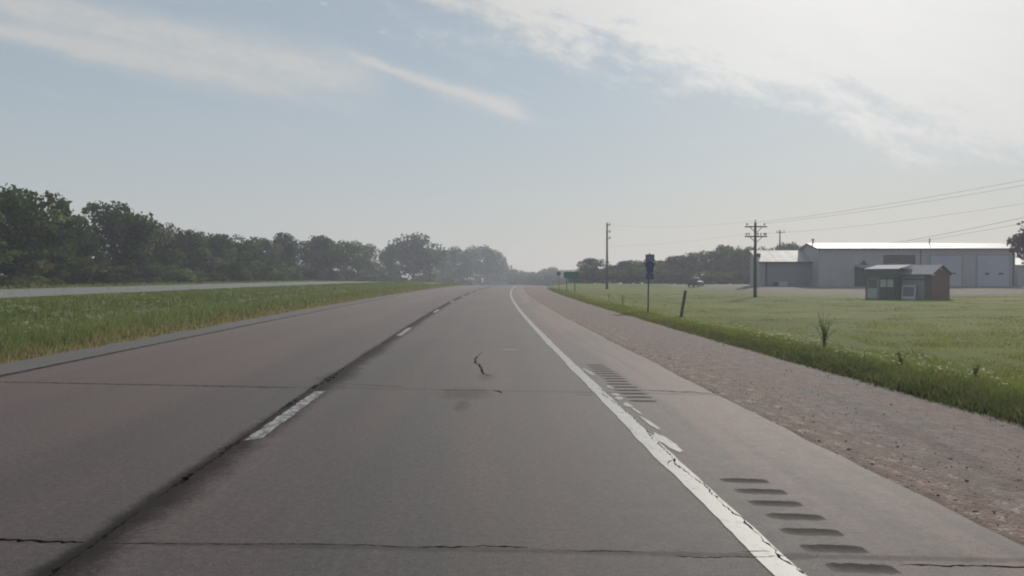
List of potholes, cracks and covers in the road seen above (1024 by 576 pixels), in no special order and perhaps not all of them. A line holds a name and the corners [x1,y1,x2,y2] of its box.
crack [17,351,710,395]
